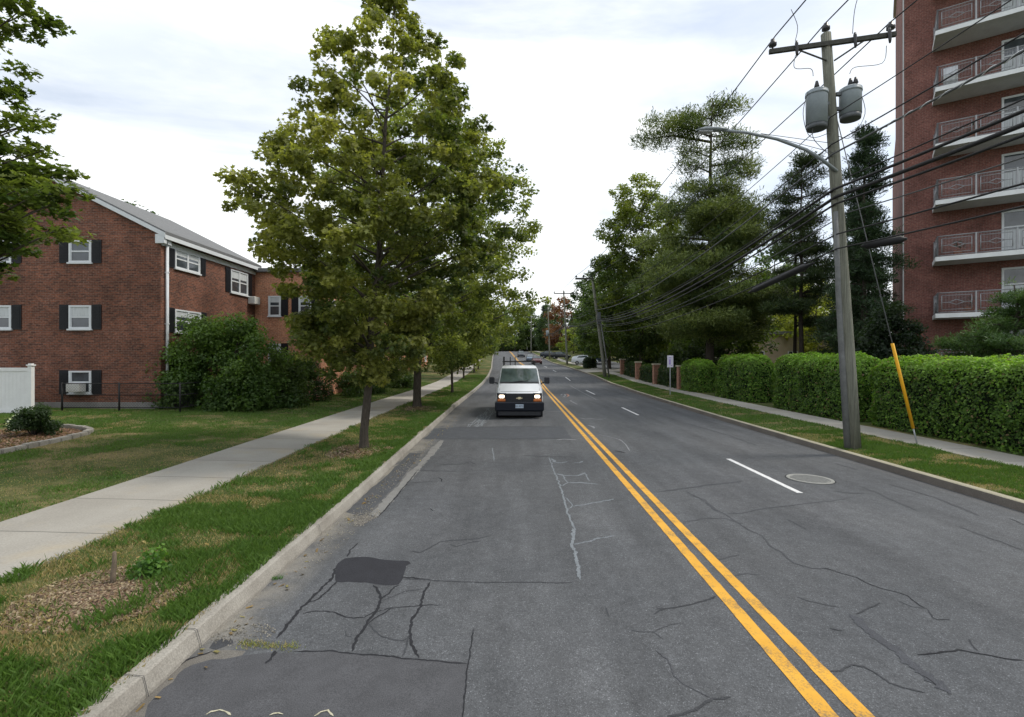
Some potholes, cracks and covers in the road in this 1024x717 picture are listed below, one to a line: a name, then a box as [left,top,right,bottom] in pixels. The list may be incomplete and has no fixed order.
manhole cover [785,474,836,484]
crack [413,535,492,553]
crack [831,639,1021,692]
crack [664,463,1024,620]
crack [630,595,731,716]
crack [303,577,570,658]
